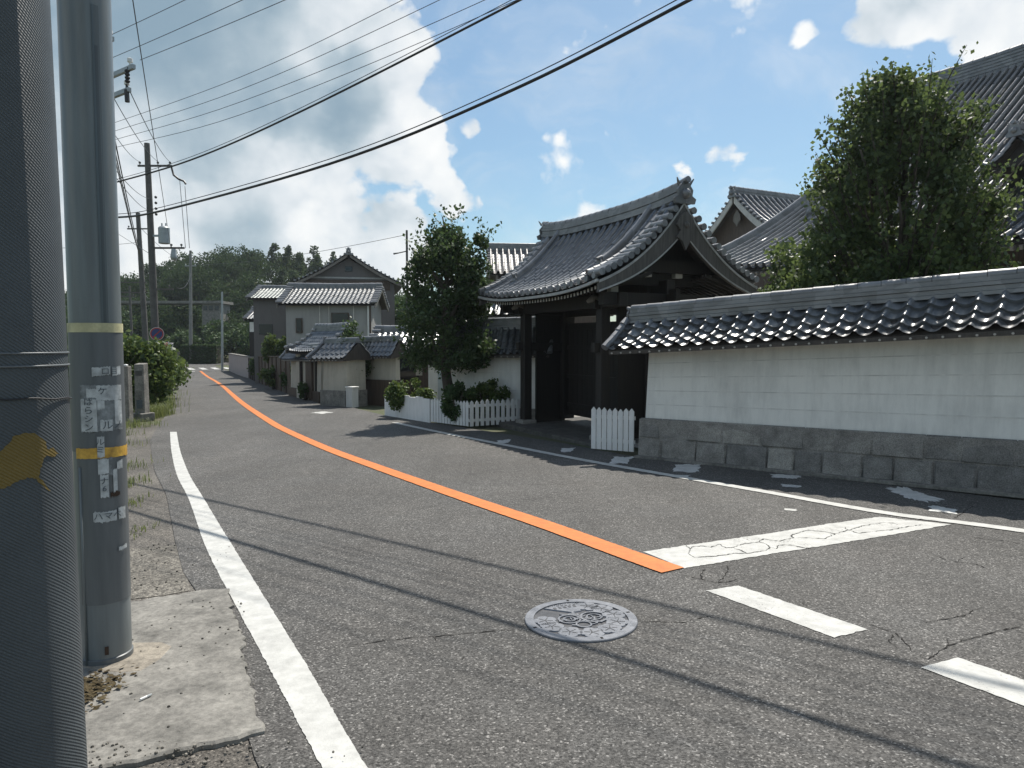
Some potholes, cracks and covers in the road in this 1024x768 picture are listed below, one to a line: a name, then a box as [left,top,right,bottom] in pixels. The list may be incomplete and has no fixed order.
crack [682,517,929,583]
manhole cover [525,599,638,643]
crack [871,624,1022,659]
crack [348,629,515,660]
